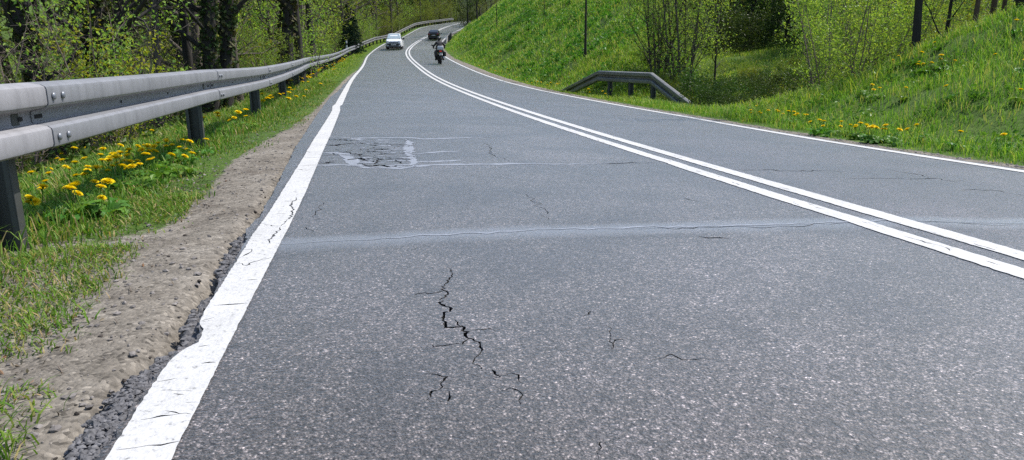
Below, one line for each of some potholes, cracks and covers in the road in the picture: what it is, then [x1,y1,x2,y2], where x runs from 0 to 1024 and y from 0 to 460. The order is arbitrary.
crack [420,265,523,404]
